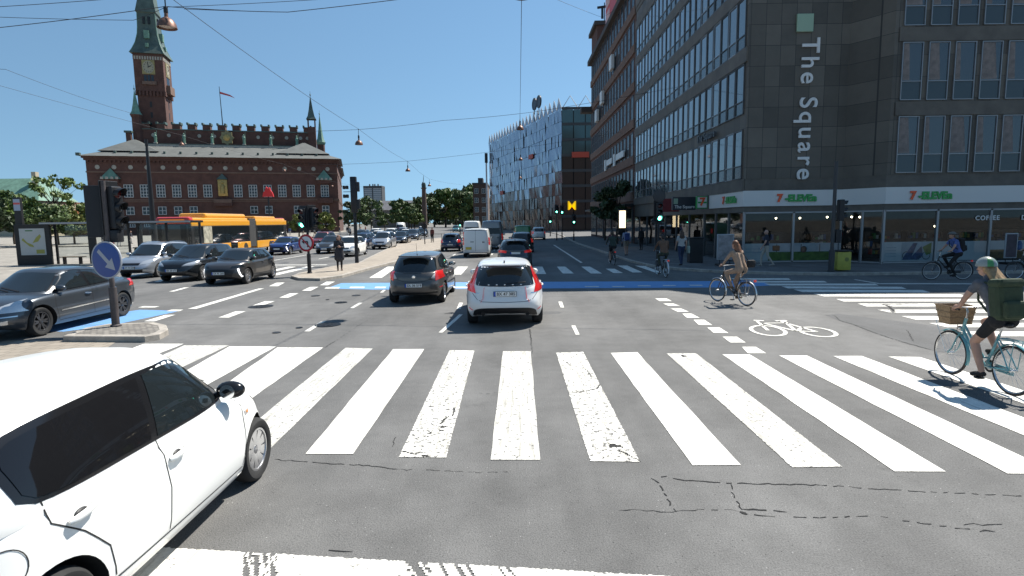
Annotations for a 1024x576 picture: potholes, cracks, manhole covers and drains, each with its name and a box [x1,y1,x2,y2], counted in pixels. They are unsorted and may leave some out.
crack [629,479,995,532]
